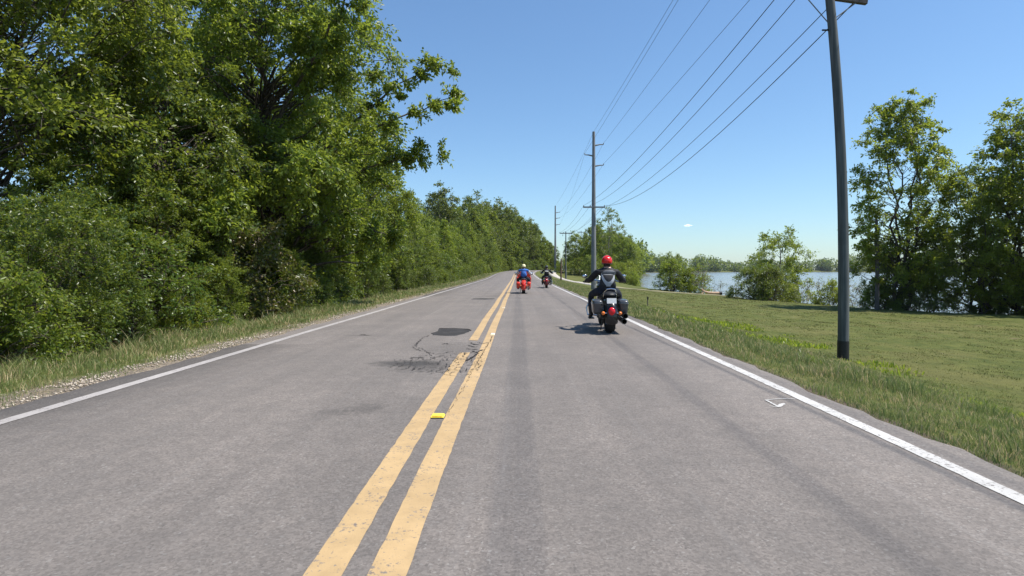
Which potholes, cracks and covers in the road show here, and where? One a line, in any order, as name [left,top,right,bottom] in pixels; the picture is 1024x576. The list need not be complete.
crack [392,335,492,410]
pothole [431,328,471,336]
